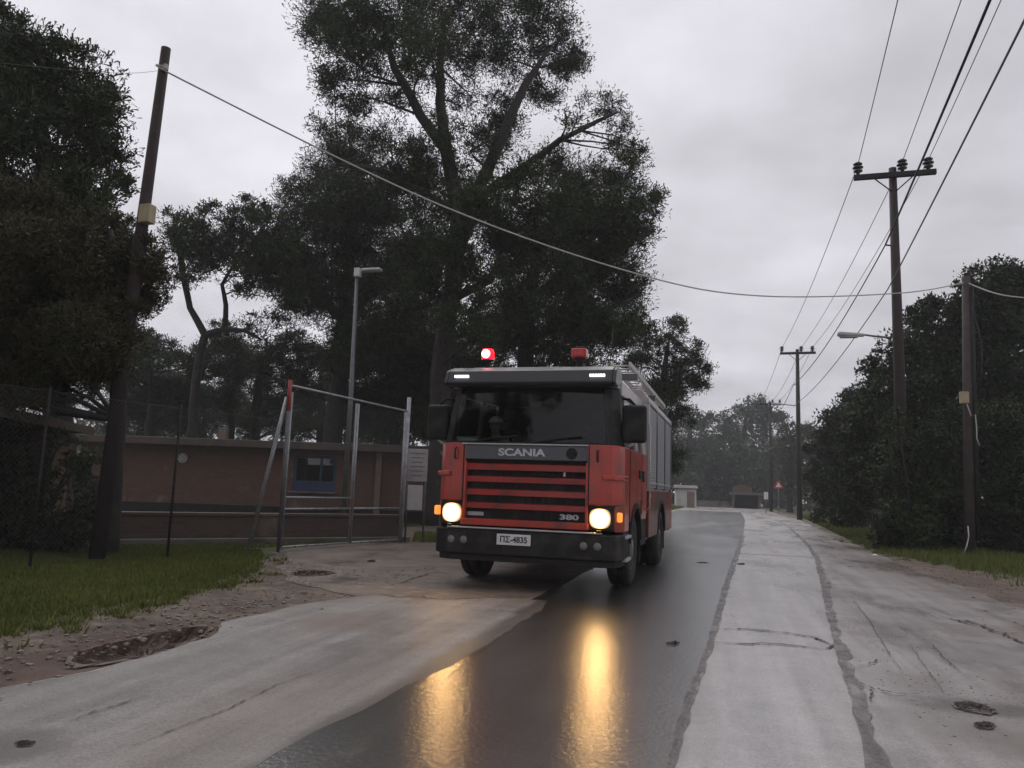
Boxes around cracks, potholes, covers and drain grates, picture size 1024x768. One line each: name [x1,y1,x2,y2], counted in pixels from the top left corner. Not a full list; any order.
crack [944,616,1024,643]
pothole [973,721,996,730]
pothole [64,625,214,667]
crack [134,669,321,745]
crack [724,628,834,648]
pothole [15,739,36,748]
pothole [951,700,998,716]
crack [852,598,960,700]
